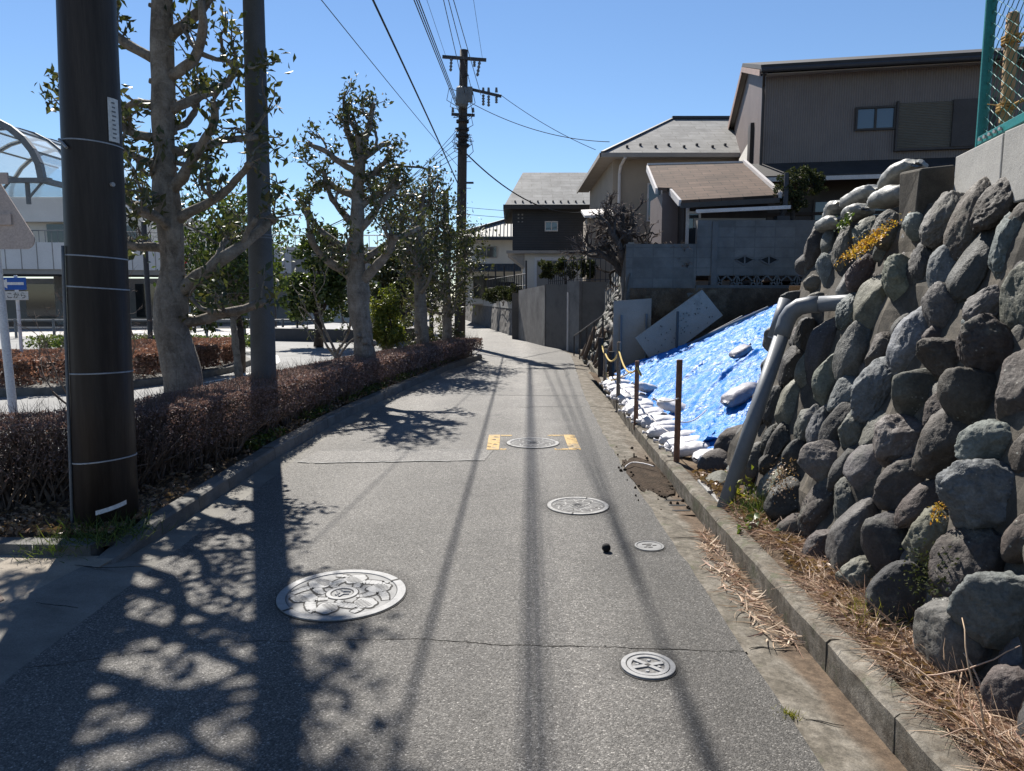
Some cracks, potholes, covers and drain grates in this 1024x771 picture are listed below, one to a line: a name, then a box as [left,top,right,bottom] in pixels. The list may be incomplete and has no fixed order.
manhole cover [633,541,666,552]
manhole cover [547,497,609,515]
manhole cover [619,652,677,682]
manhole cover [506,437,560,449]
manhole cover [275,569,407,623]
